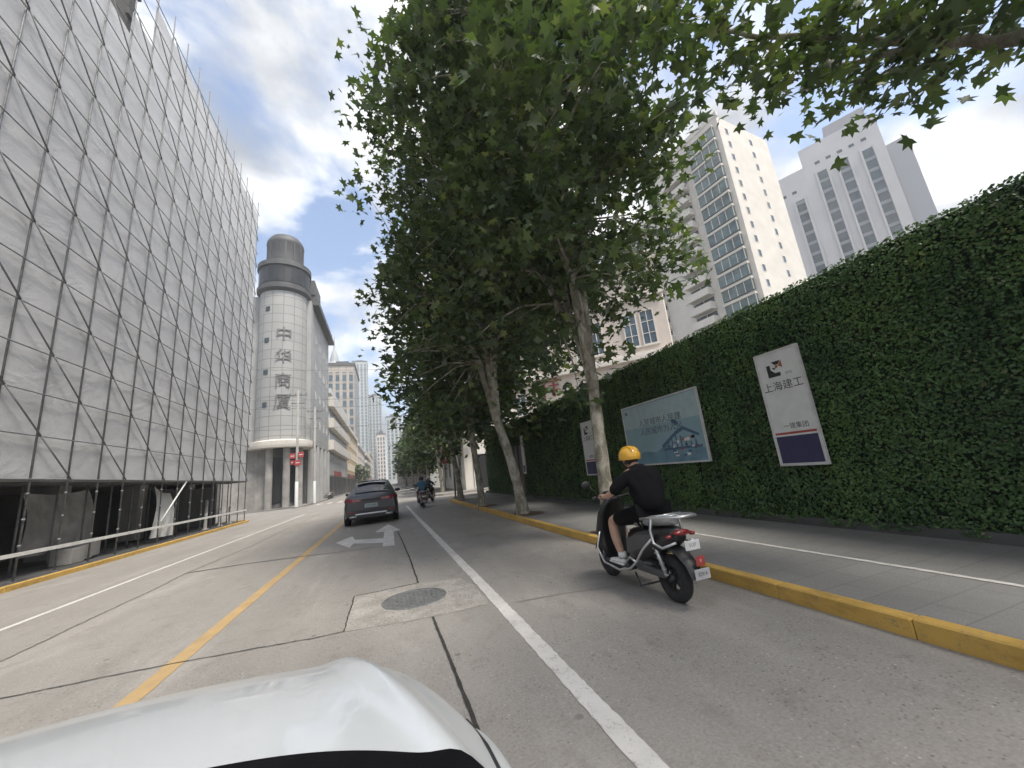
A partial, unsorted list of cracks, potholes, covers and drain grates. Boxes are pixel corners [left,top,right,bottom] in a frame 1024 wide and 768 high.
manhole cover [381,587,446,610]
